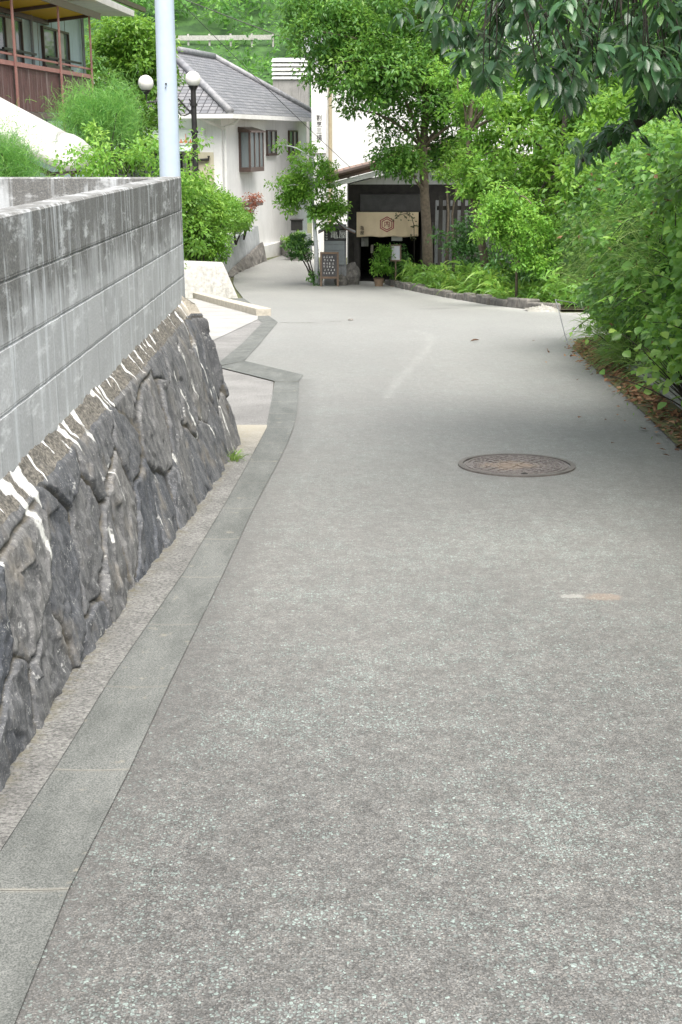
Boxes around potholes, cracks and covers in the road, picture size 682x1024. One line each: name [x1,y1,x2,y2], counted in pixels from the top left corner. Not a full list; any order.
manhole cover [458,453,576,477]
